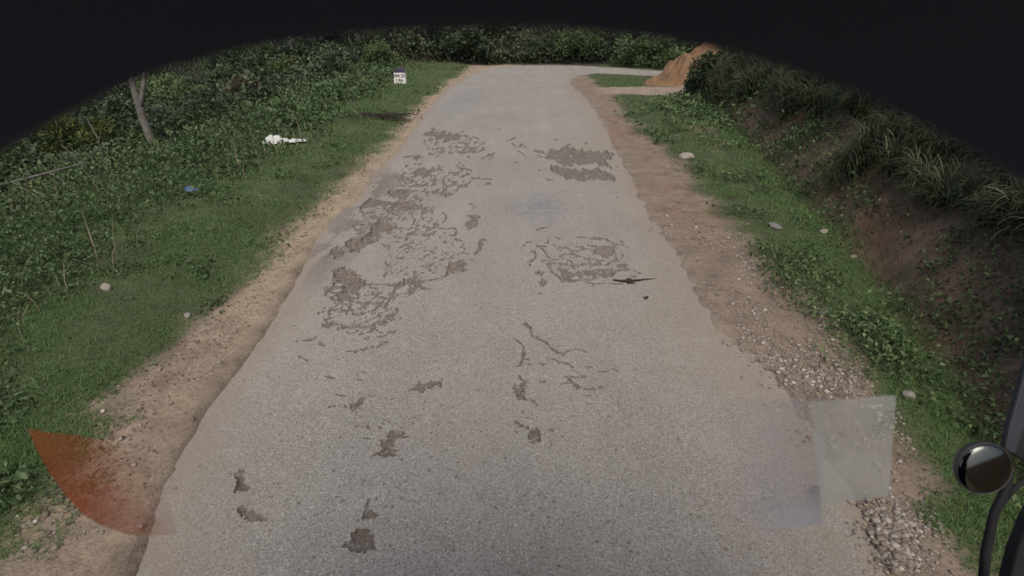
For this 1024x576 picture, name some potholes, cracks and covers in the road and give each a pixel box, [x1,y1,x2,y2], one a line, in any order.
pothole [538,164,616,183]
pothole [340,528,377,554]
pothole [237,504,268,523]
crack [521,227,641,295]
pothole [370,419,409,460]
pothole [228,468,250,494]
crack [511,322,619,445]
pothole [546,138,619,169]
